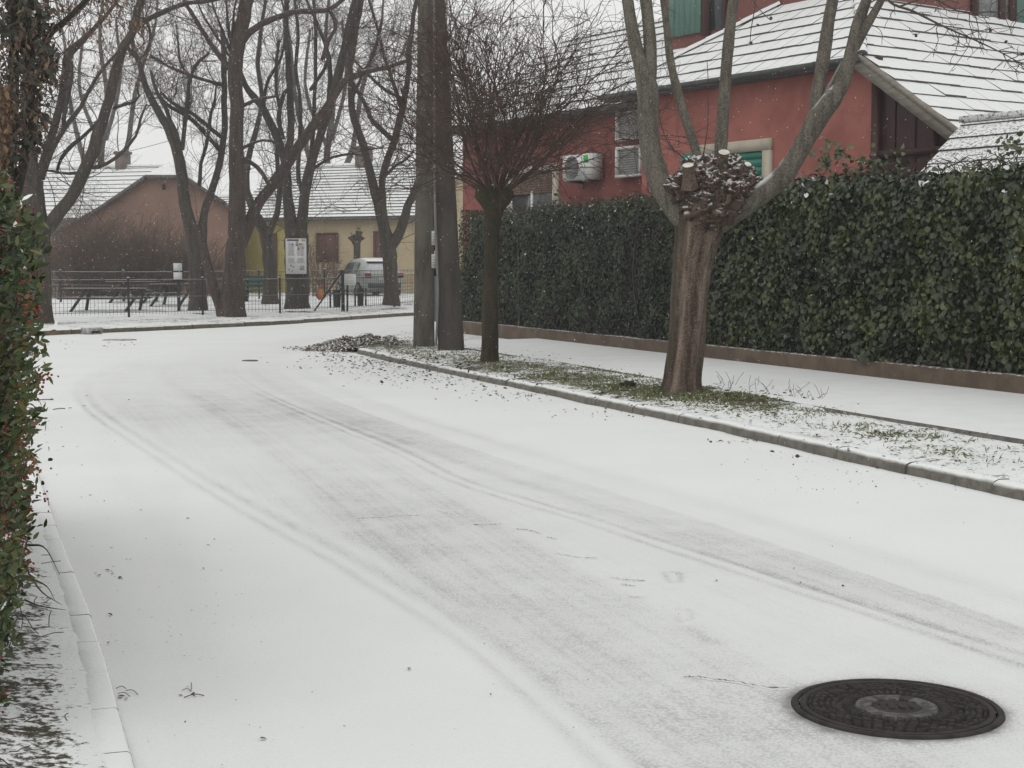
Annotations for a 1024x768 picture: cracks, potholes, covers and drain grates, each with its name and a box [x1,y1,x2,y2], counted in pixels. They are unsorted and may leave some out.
manhole cover [791,678,1006,740]
crack [683,675,790,690]
